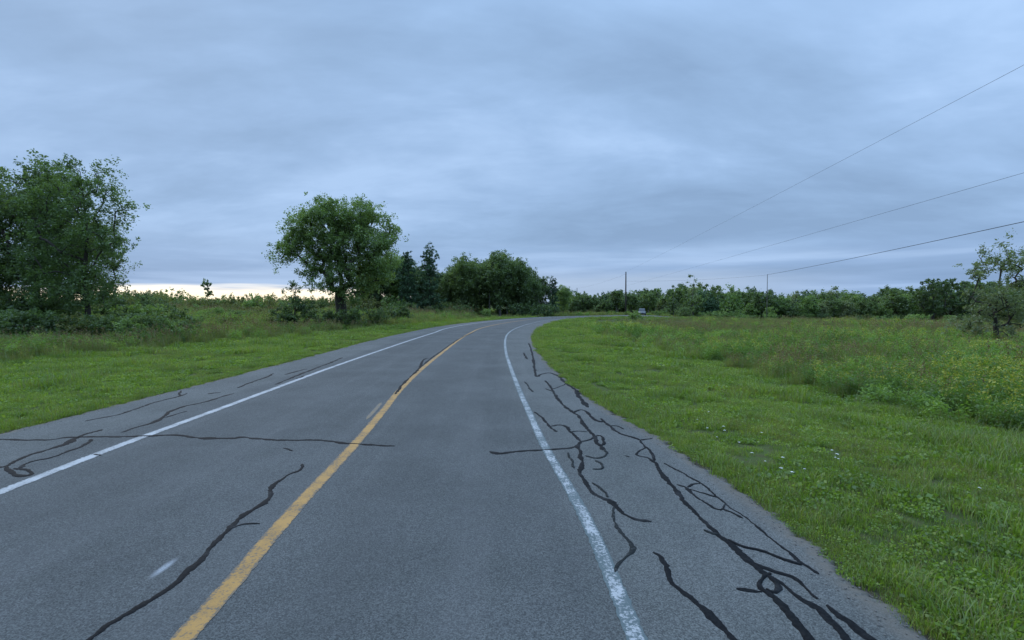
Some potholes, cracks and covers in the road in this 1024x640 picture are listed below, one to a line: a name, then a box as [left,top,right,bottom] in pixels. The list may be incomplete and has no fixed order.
crack [0,357,394,477]
crack [489,343,819,593]
